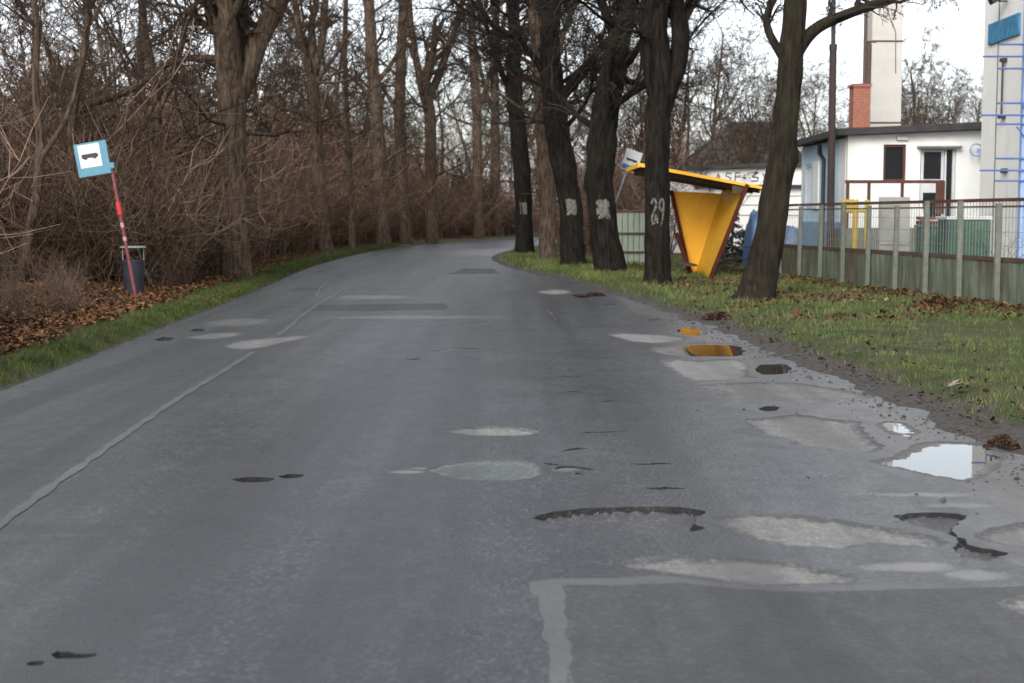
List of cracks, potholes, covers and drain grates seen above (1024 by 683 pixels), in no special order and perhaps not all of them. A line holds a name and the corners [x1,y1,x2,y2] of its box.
pothole [533,507,706,532]
pothole [648,343,756,357]
pothole [894,512,1008,561]
crack [543,431,619,475]
pothole [868,441,1006,482]
pothole [51,651,97,659]
